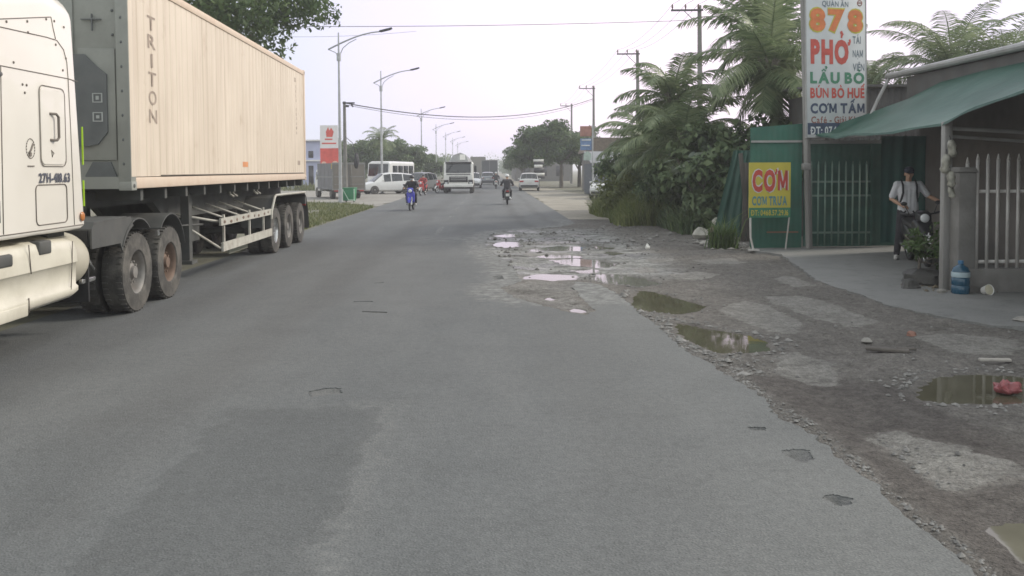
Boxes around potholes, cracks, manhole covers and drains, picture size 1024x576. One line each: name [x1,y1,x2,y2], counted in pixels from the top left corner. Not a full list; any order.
pothole [823,495,853,507]
pothole [781,450,813,463]
pothole [547,258,621,268]
pothole [670,320,774,354]
pothole [627,291,710,315]
pothole [906,372,1024,405]
